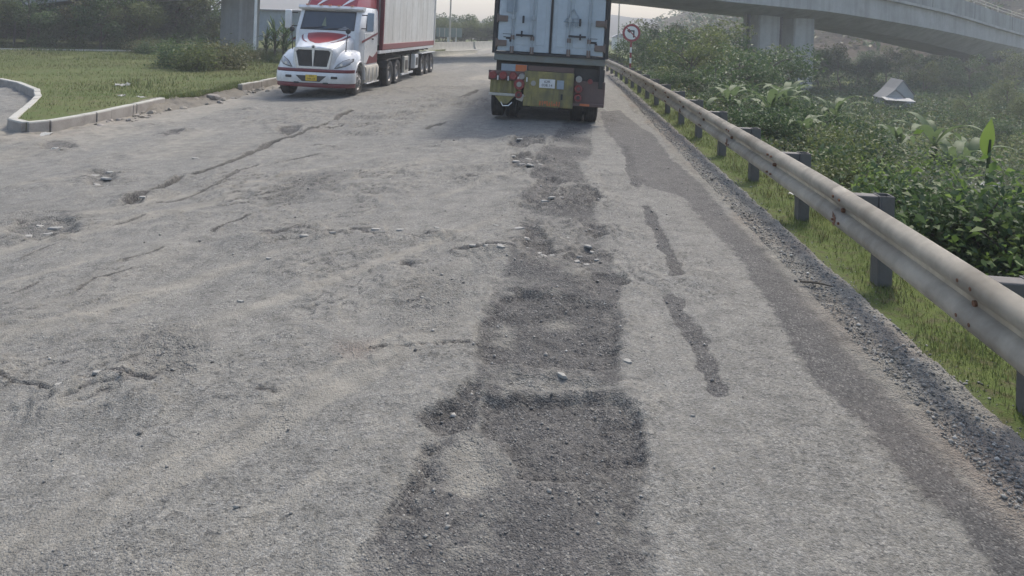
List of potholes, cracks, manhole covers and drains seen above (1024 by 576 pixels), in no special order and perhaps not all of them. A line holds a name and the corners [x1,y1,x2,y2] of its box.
pothole [4,215,82,241]
crack [112,109,515,250]
crack [0,365,154,389]
crack [74,246,165,291]
pothole [38,139,78,149]
pothole [85,168,118,187]
